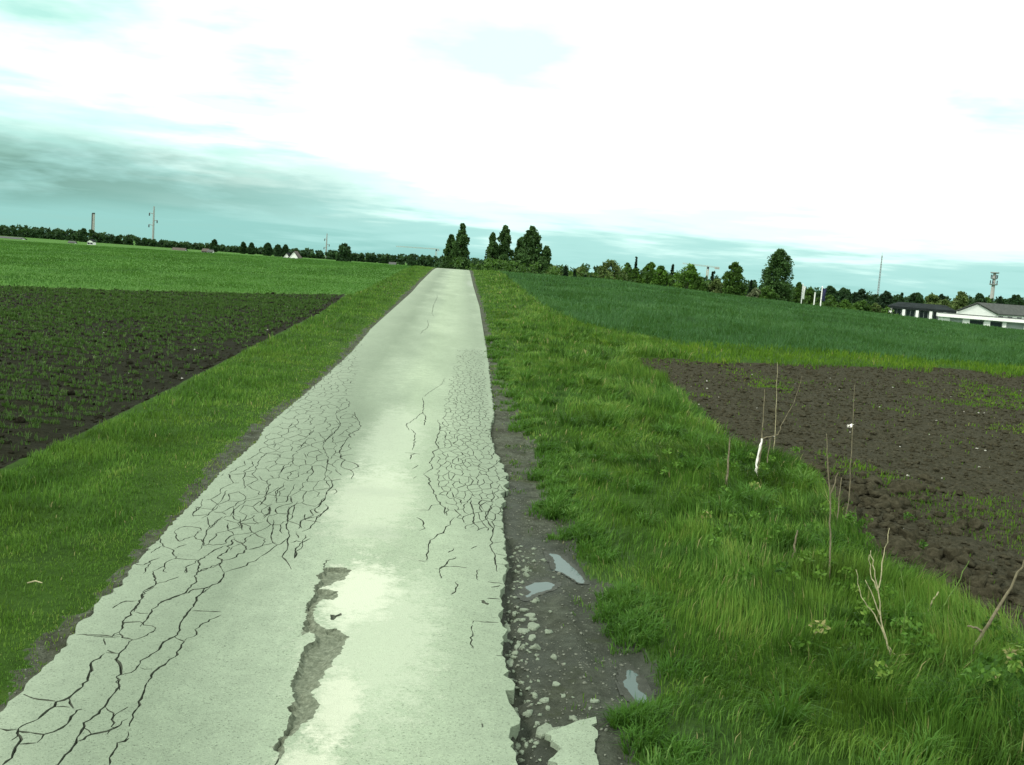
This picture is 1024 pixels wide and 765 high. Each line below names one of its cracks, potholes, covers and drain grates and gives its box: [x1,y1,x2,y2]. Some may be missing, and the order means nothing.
crack [405,349,506,599]
pothole [272,567,352,759]
pothole [516,578,562,601]
crack [0,350,361,765]
pothole [543,550,591,584]
